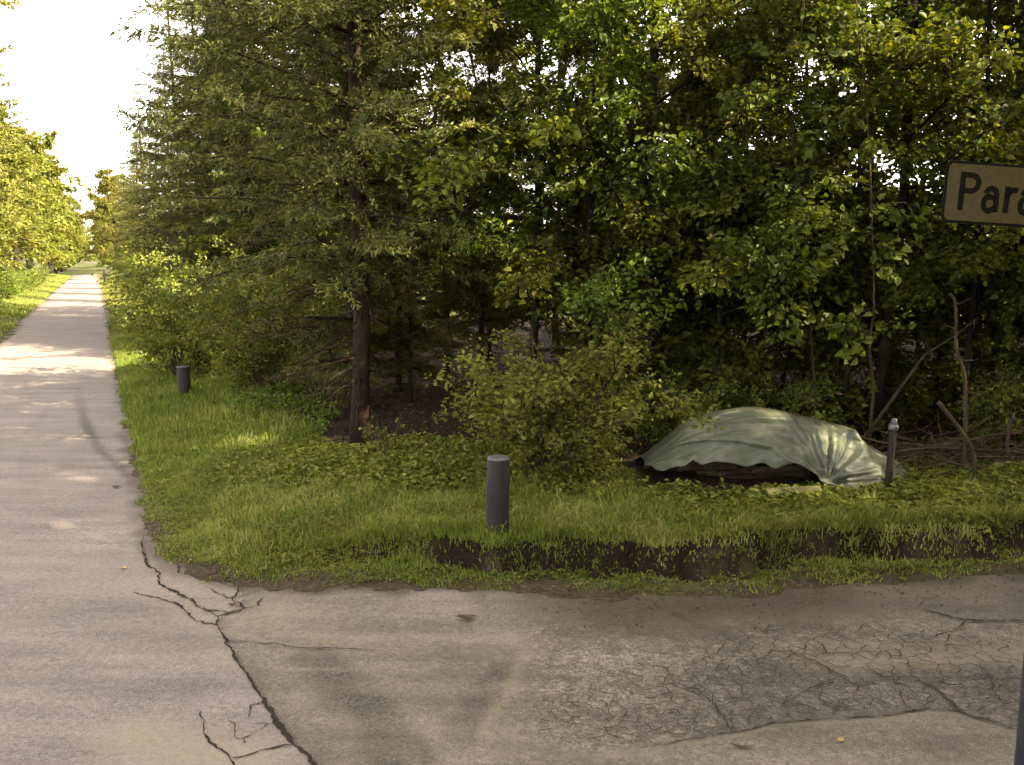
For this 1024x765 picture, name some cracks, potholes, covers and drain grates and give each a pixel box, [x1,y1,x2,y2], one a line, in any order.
crack [925,609,1020,637]
crack [134,534,368,765]
crack [535,623,1023,748]
